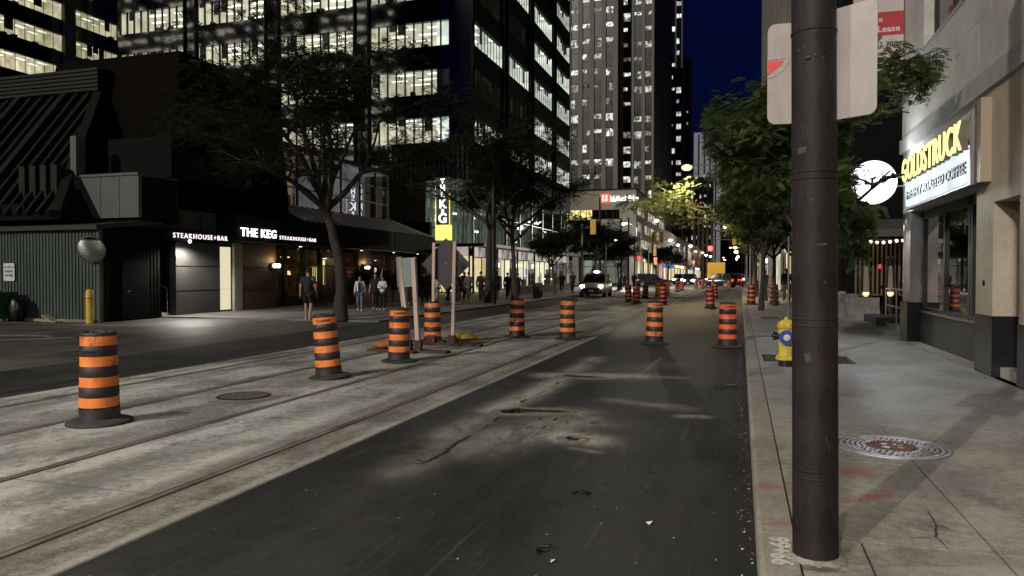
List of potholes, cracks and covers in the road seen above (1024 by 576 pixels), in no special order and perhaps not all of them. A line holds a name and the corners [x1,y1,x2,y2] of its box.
crack [416,416,501,464]
manhole cover [838,435,953,460]
pothole [490,407,579,416]
manhole cover [205,390,282,402]
crack [928,511,959,548]
pothole [555,435,592,444]
